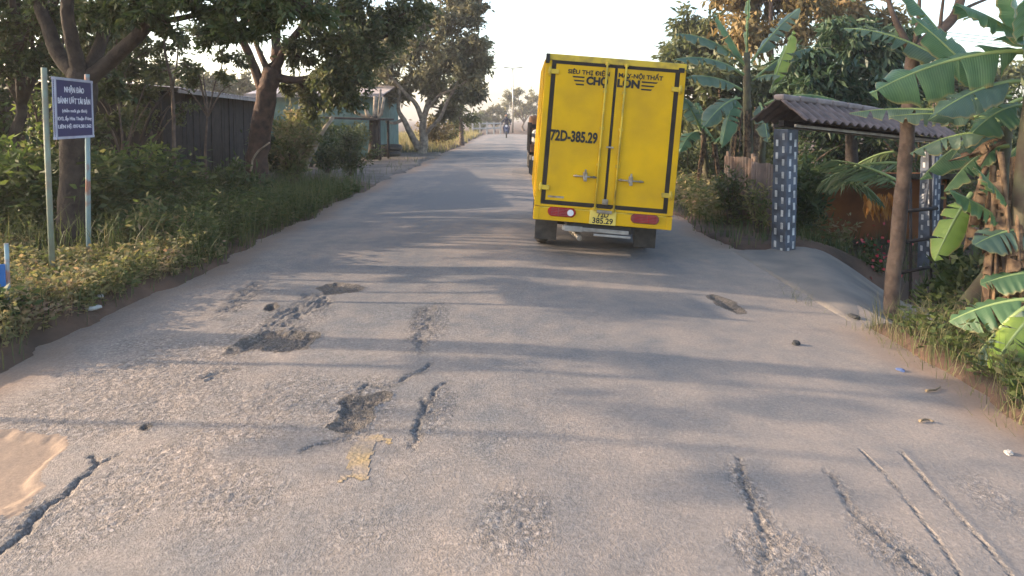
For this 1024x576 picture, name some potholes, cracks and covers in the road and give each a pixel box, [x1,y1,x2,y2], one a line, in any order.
crack [819,468,938,576]
crack [0,451,126,557]
pothole [222,328,321,356]
pothole [315,282,365,295]
pothole [325,391,394,434]
pothole [263,302,280,312]
crack [733,455,779,576]
crack [352,303,454,452]
